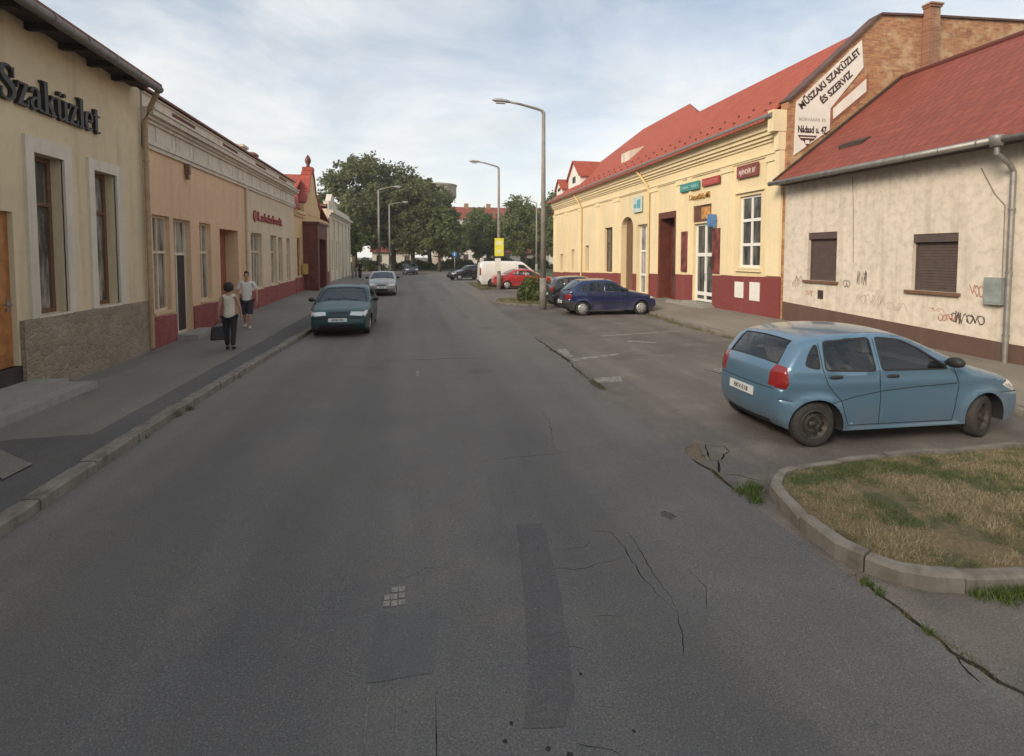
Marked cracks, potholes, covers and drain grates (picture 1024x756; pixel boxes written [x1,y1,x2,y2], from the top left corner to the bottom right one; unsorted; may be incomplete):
pothole [685,444,706,462]
crack [536,338,589,379]
crack [559,531,684,653]
crack [859,581,1024,696]
